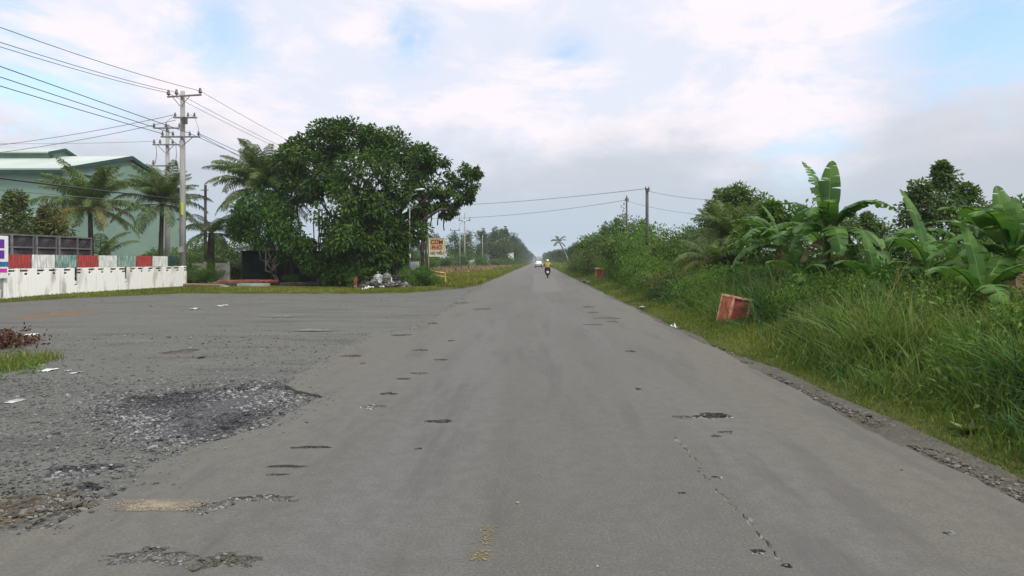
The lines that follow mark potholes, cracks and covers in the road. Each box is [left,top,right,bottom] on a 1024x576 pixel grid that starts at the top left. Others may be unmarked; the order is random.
pothole [182,550,263,572]
pothole [228,494,299,502]
crack [674,438,783,562]
pothole [107,384,301,442]
pothole [69,481,105,493]
pothole [42,463,129,479]
